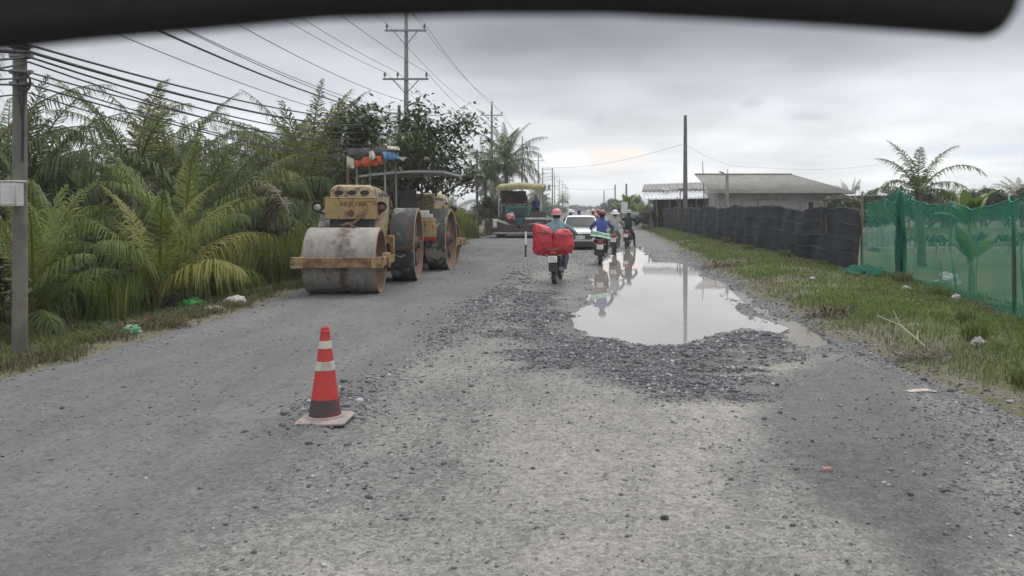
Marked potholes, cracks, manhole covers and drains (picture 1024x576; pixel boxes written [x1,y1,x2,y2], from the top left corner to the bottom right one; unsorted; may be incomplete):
pothole [546,245,777,348]
